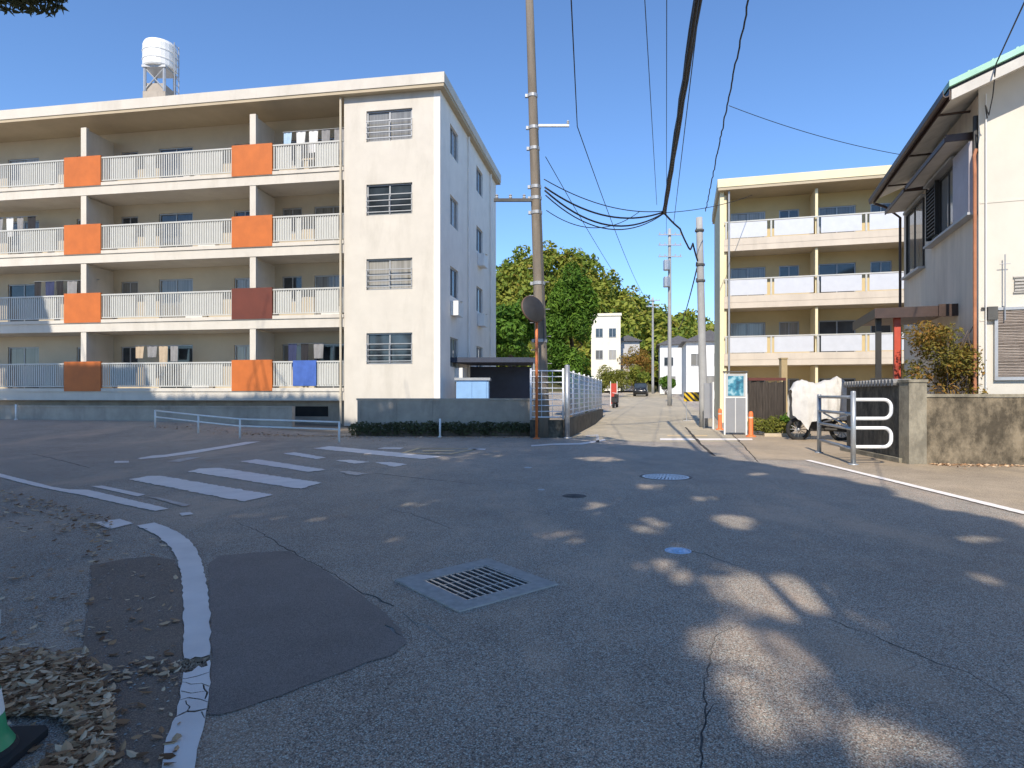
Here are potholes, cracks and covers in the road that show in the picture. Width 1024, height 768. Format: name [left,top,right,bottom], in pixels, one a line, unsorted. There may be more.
crack [699,624,740,768]
drain grate [395,558,558,613]
